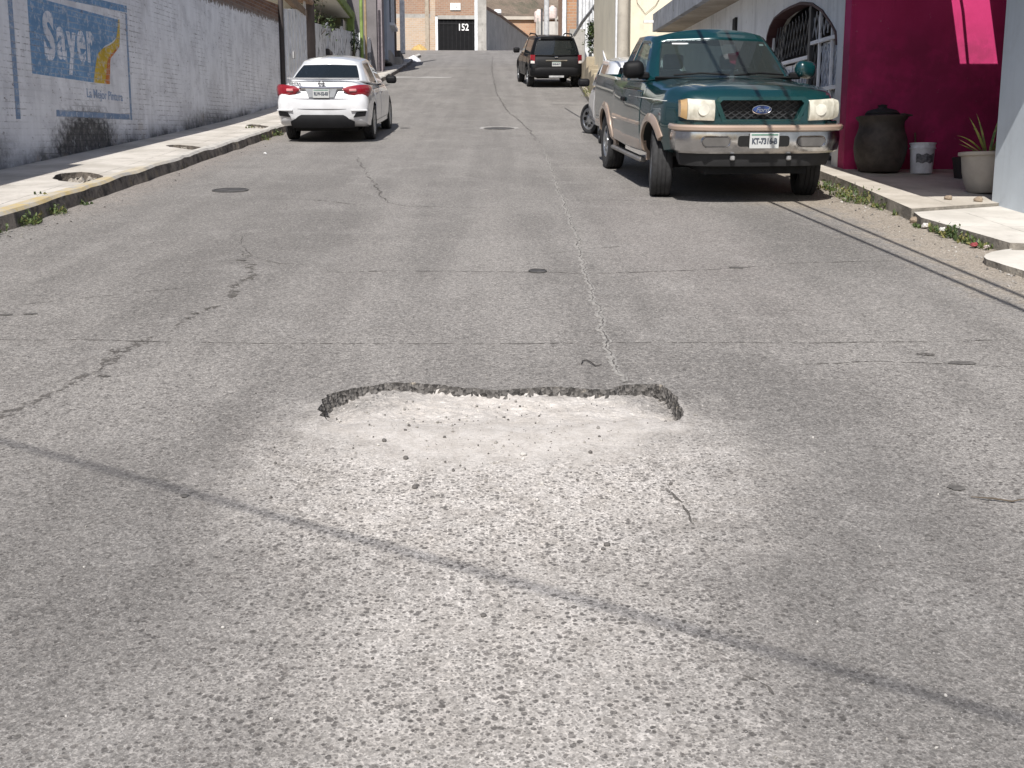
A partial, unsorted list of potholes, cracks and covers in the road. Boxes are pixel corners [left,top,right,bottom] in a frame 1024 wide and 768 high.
pothole [317,382,684,438]
